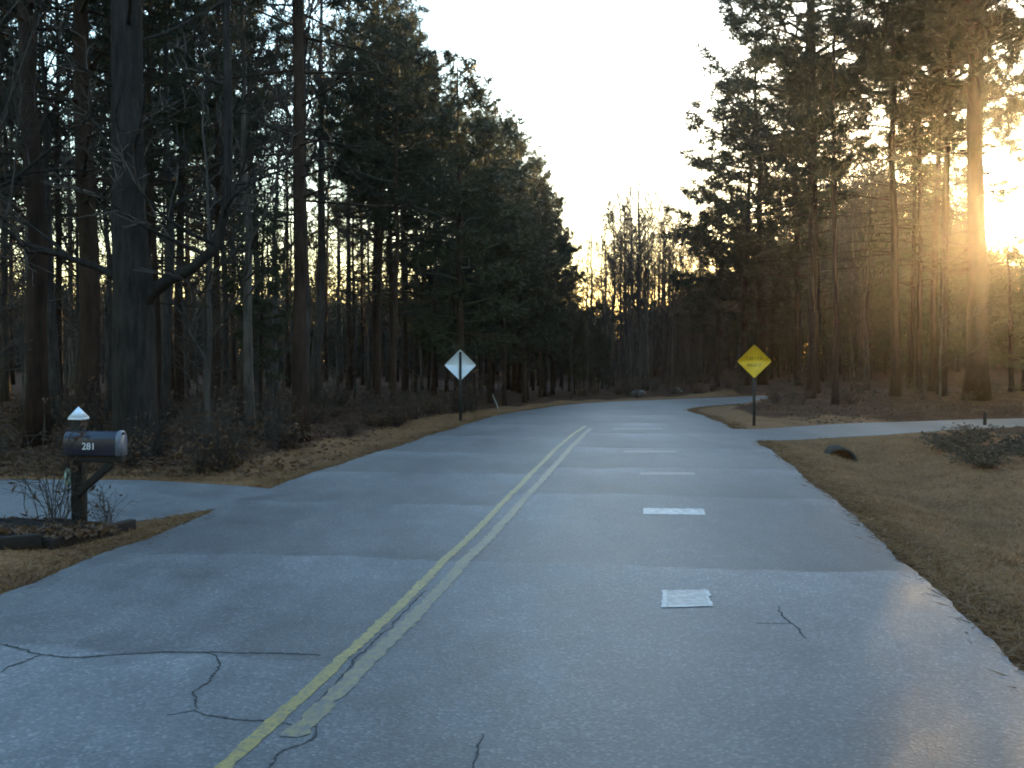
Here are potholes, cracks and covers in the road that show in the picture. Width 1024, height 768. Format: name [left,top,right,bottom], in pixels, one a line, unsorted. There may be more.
crack [769,606,806,638]
crack [1,644,318,768]
